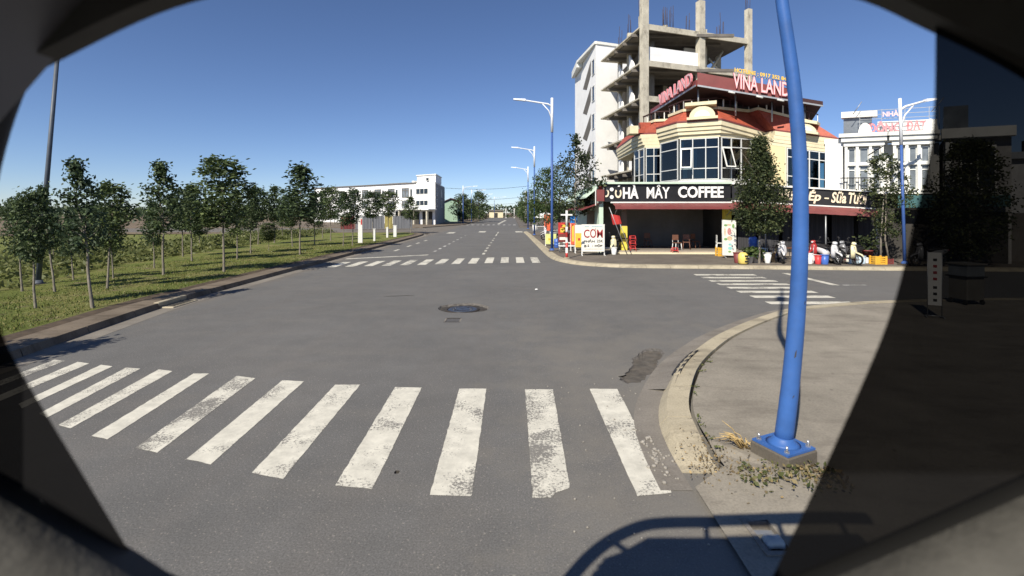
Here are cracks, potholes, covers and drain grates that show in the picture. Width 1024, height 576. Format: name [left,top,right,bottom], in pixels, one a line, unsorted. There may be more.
manhole cover [438,303,489,313]
